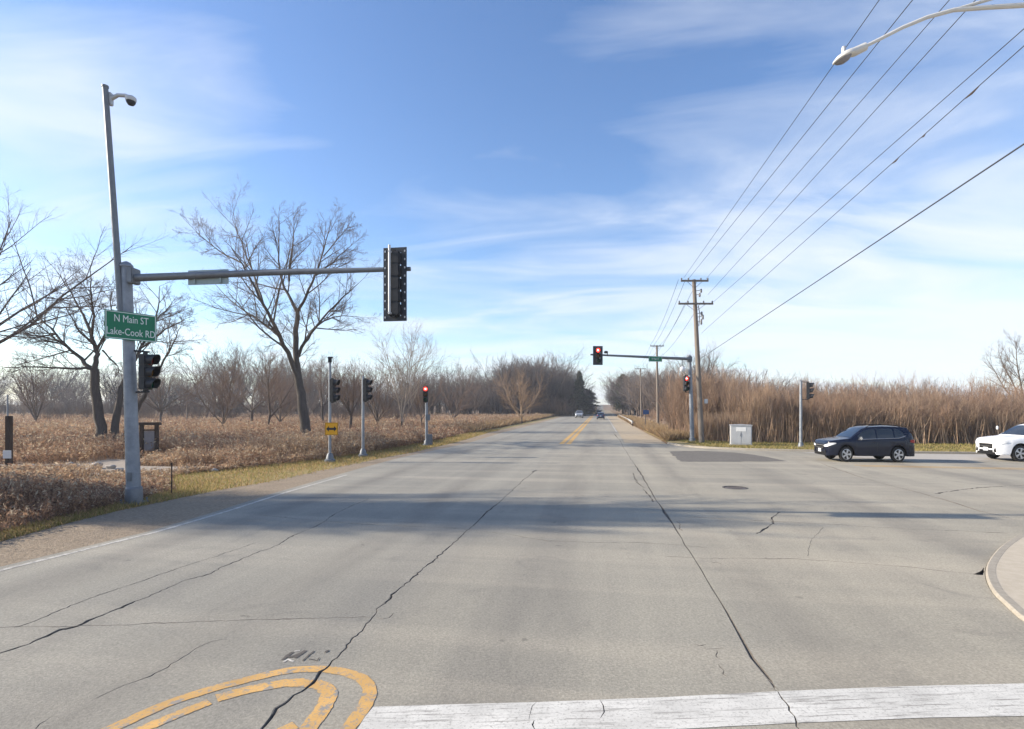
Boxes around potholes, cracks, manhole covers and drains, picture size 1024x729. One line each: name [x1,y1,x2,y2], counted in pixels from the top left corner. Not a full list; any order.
crack [0,434,997,729]
